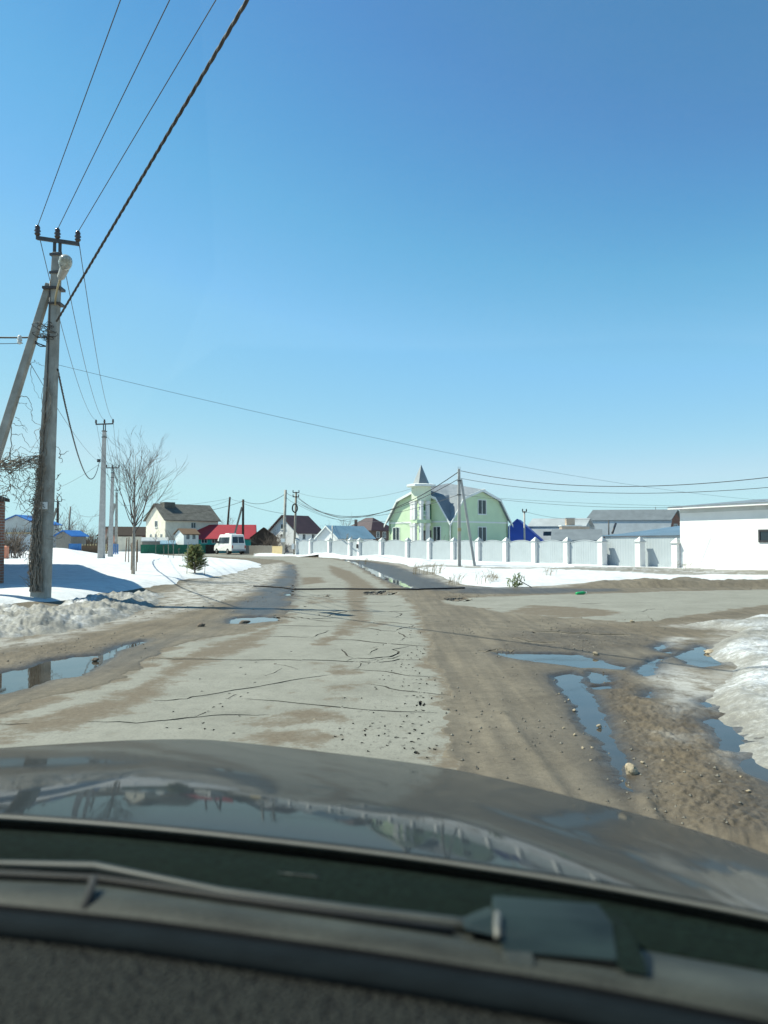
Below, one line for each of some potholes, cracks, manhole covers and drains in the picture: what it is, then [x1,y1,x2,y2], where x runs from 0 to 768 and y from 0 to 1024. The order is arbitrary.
crack [0,595,450,725]
